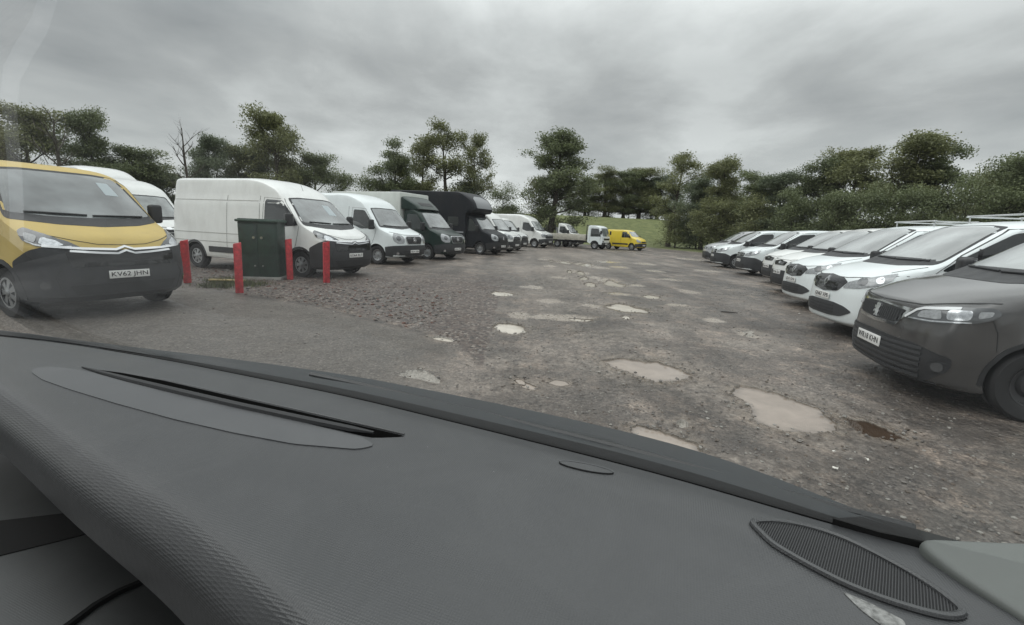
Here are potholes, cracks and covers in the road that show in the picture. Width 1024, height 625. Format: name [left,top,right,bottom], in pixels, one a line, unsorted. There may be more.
pothole [841,416,910,441]
pothole [730,384,840,434]
pothole [493,323,527,335]
pothole [398,370,440,384]
pothole [604,303,648,313]
pothole [600,357,693,382]
pothole [630,424,701,452]
